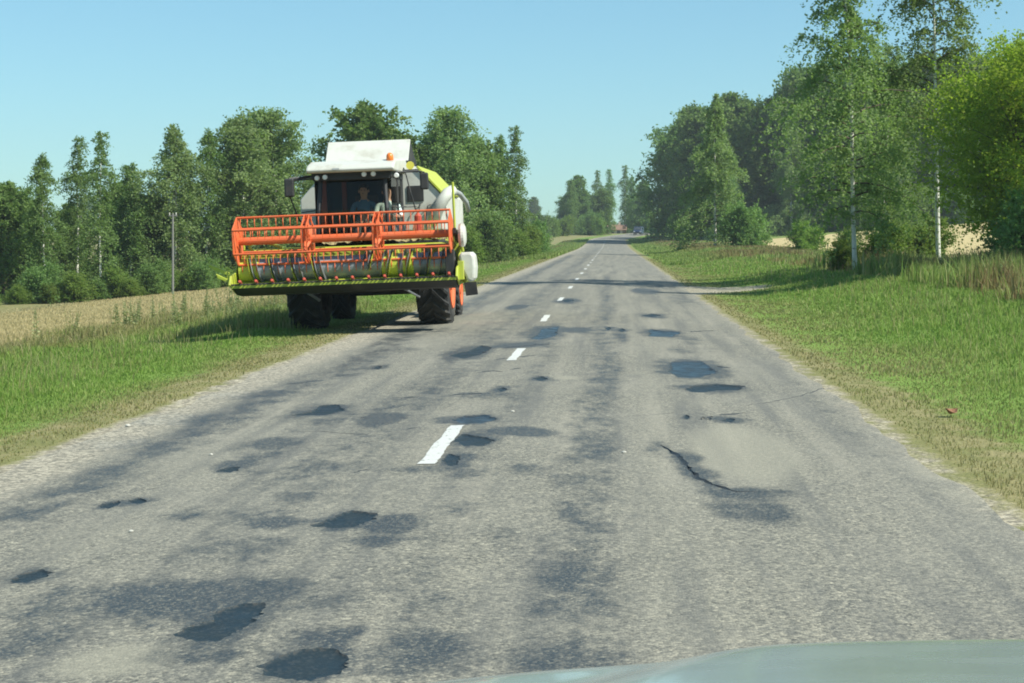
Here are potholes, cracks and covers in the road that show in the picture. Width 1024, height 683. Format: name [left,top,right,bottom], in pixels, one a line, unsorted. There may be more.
pothole [173,602,266,642]
pothole [453,434,495,446]
pothole [310,510,378,528]
pothole [454,415,497,424]
crack [699,388,824,420]
crack [661,445,753,492]
pothole [685,384,746,393]
pothole [667,361,718,378]
pothole [648,329,680,337]
pothole [441,454,461,466]
pothole [10,569,53,583]
pothole [449,345,491,359]
